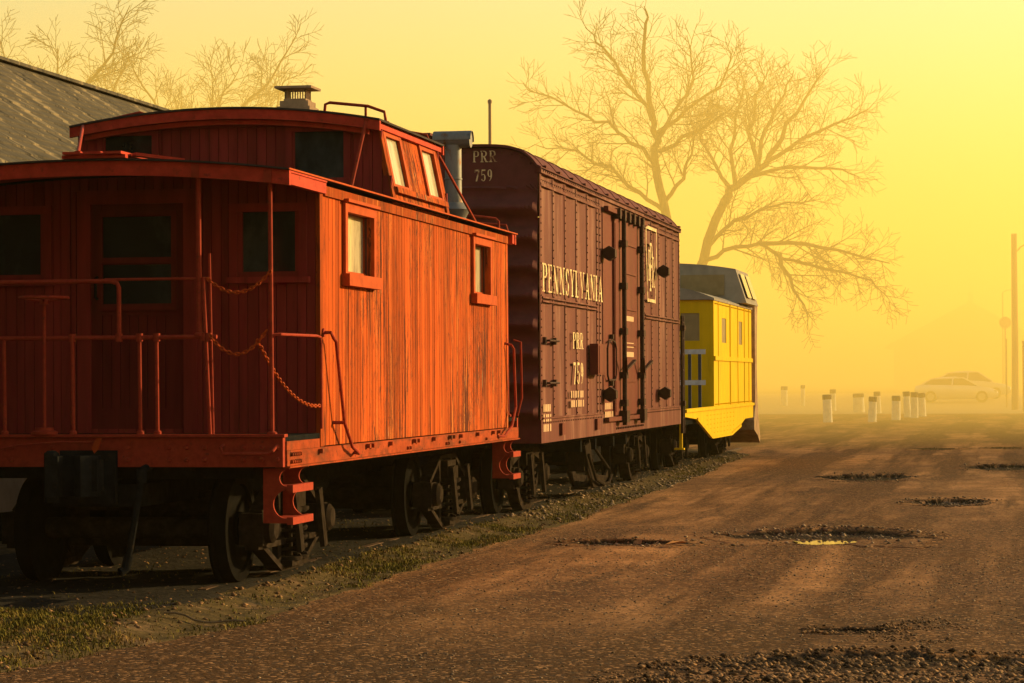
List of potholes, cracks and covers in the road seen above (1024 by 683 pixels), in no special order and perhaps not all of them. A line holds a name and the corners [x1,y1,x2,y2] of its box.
pothole [547,536,709,547]
pothole [953,462,1024,472]
pothole [809,472,918,482]
pothole [617,644,1024,683]
pothole [798,624,912,635]
pothole [896,496,1002,507]
pothole [683,524,950,549]
